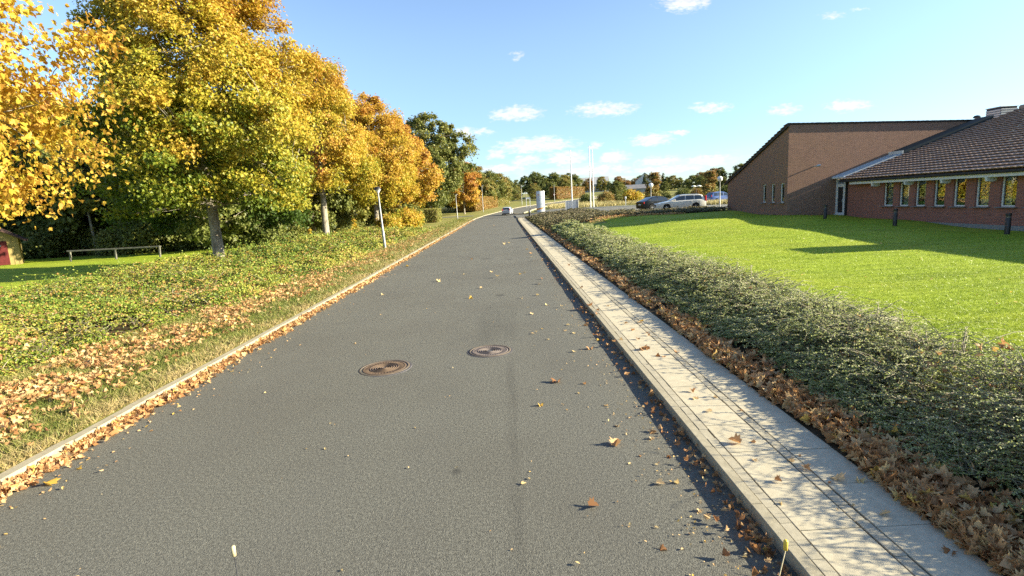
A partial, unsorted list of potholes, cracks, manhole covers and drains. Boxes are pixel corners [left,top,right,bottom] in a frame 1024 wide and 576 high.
manhole cover [467,345,513,358]
manhole cover [359,360,412,377]
